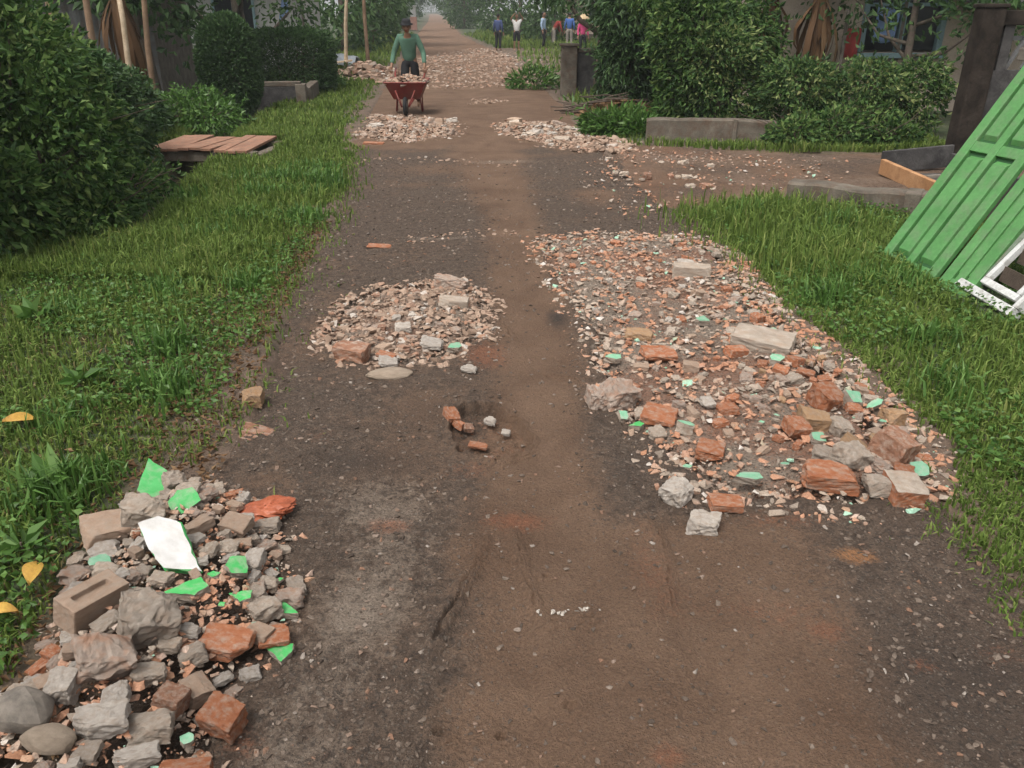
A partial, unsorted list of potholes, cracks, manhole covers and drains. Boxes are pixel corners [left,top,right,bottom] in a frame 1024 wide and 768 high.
crack [424,527,611,654]
pothole [437,399,541,469]
